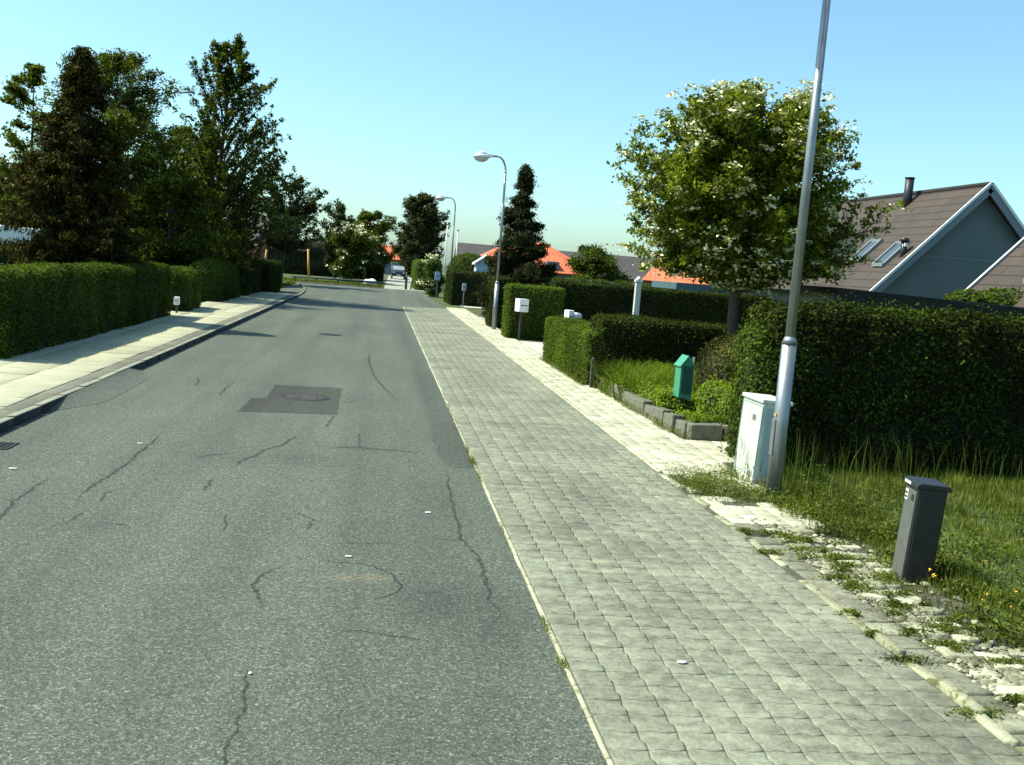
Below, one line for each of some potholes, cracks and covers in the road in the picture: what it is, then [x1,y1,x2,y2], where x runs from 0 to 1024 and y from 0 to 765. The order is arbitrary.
crack [223,669,249,765]
crack [250,561,403,601]
crack [69,435,159,522]
manhole cover [278,393,330,401]
drain grate [0,442,19,450]
crack [445,469,506,624]
